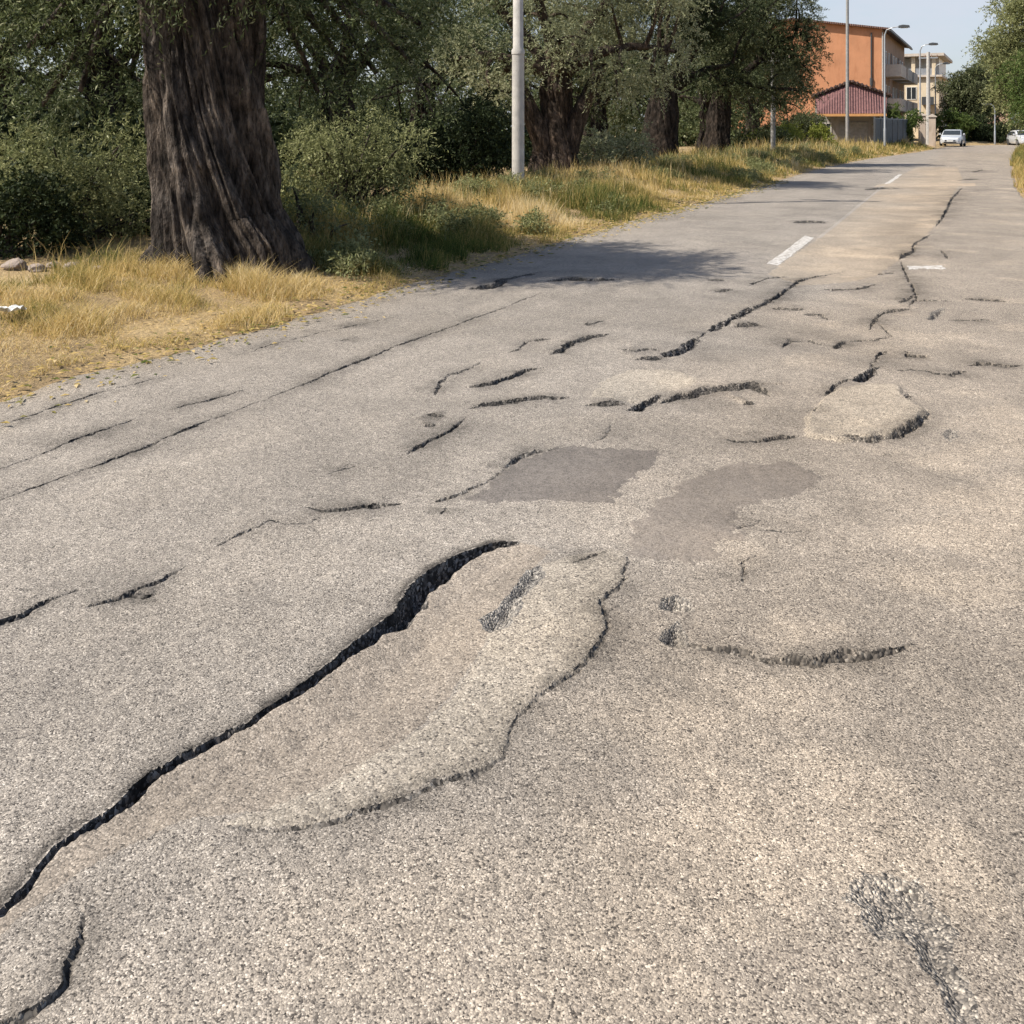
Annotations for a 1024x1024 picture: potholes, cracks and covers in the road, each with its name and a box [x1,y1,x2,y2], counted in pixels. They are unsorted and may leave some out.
crack [407,170,1022,454]
crack [0,425,612,626]
crack [0,903,87,1024]
crack [0,295,535,501]
